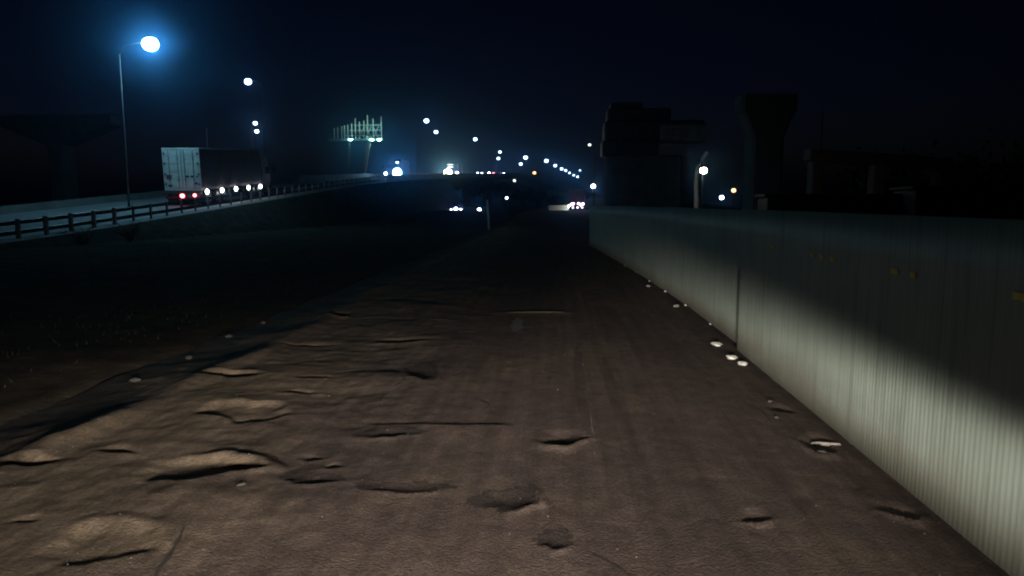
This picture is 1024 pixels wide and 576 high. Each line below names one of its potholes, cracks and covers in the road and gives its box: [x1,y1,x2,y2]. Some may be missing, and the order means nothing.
pothole [403,362,439,380]
pothole [793,430,837,454]
pothole [764,402,798,414]
pothole [25,516,177,572]
pothole [860,497,924,520]
pothole [188,398,295,425]
pothole [732,505,778,524]
pothole [129,451,269,483]
pothole [350,426,429,438]
pothole [276,471,347,484]
pothole [466,486,540,512]
